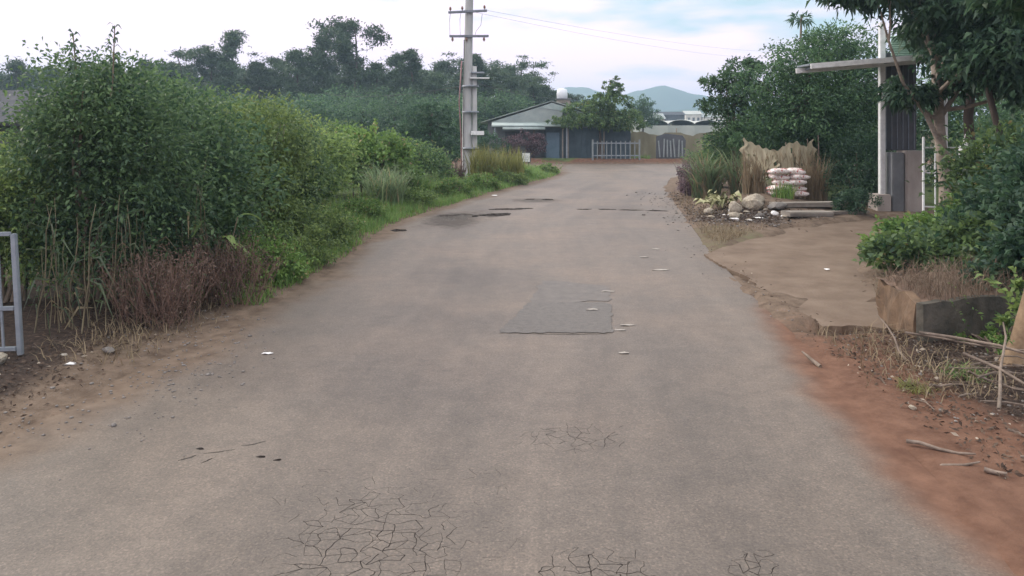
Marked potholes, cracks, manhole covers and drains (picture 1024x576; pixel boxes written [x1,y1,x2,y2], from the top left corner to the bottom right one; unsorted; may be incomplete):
crack [538,547,654,576]
crack [728,550,779,576]
crack [233,468,527,576]
crack [519,421,624,452]
pothole [438,213,480,221]
crack [178,441,265,463]
